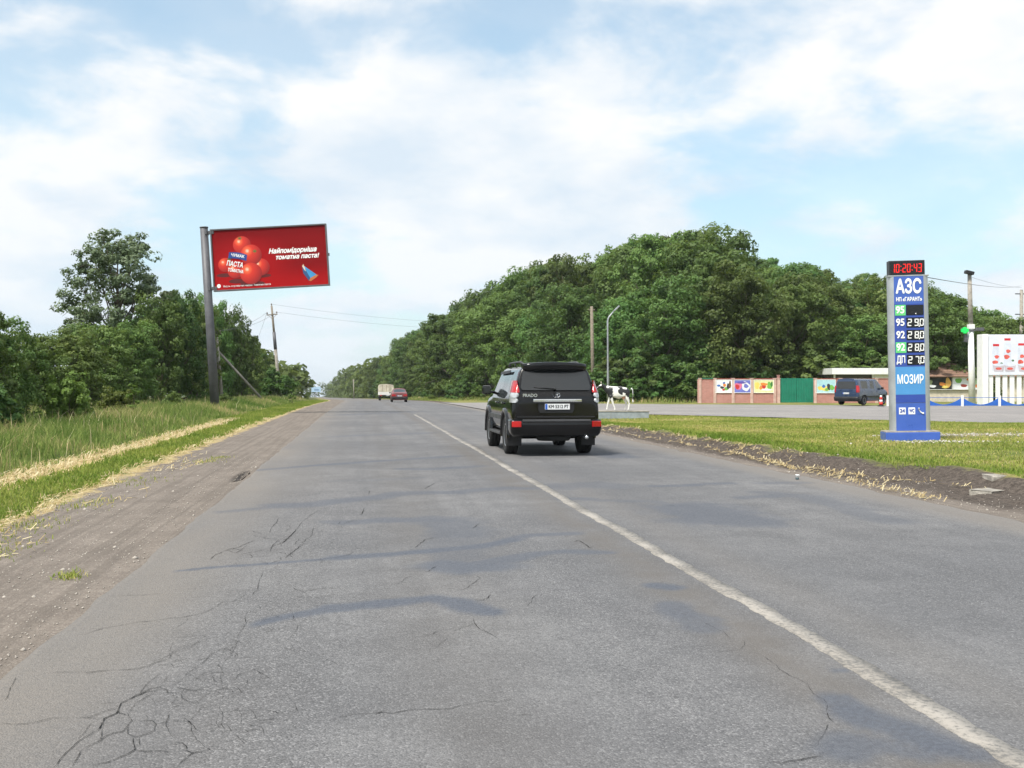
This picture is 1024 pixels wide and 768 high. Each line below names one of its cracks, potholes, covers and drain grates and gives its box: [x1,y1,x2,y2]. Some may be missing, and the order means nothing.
crack [9,640,289,766]
crack [214,512,363,569]
crack [68,575,353,711]
